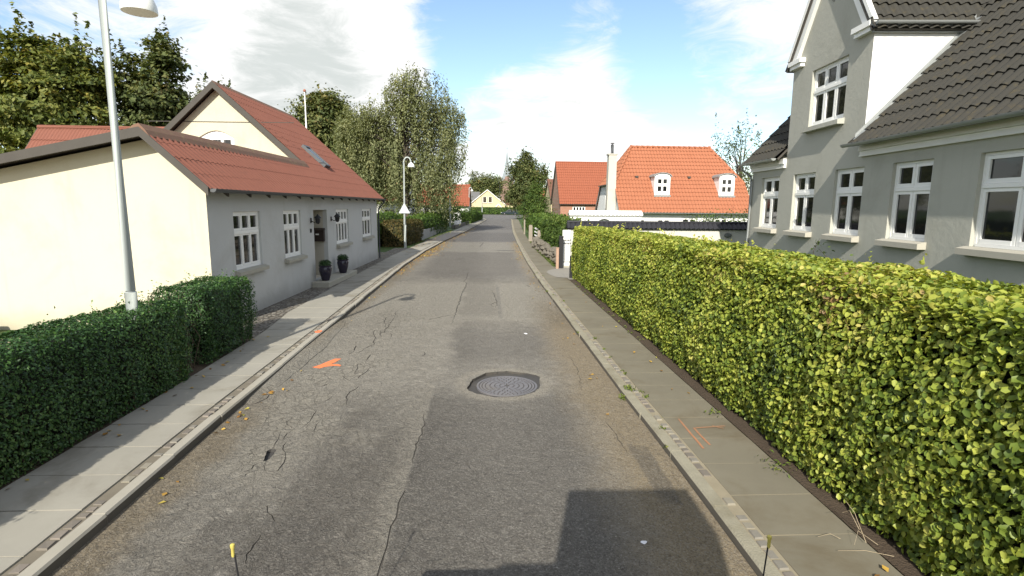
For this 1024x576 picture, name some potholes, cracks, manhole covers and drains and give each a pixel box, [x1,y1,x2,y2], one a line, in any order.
manhole cover [467,371,540,397]
crack [412,415,426,464]
crack [240,311,397,477]
crack [377,491,405,576]
